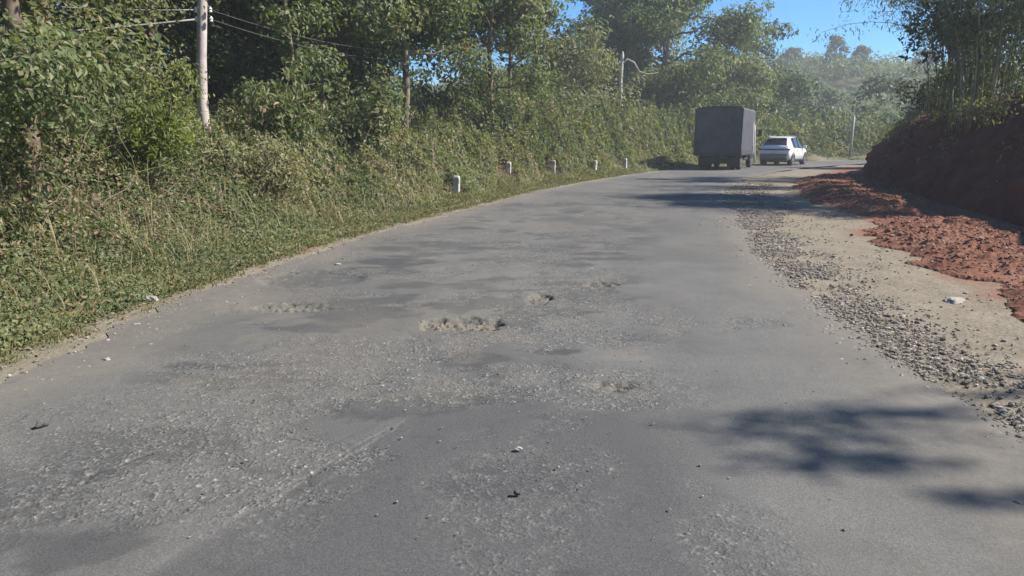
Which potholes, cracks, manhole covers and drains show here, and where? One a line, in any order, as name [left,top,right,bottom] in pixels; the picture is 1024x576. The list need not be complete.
pothole [220,300,354,314]
pothole [568,280,634,290]
crack [236,420,412,511]
pothole [512,289,565,311]
pothole [387,313,534,336]
